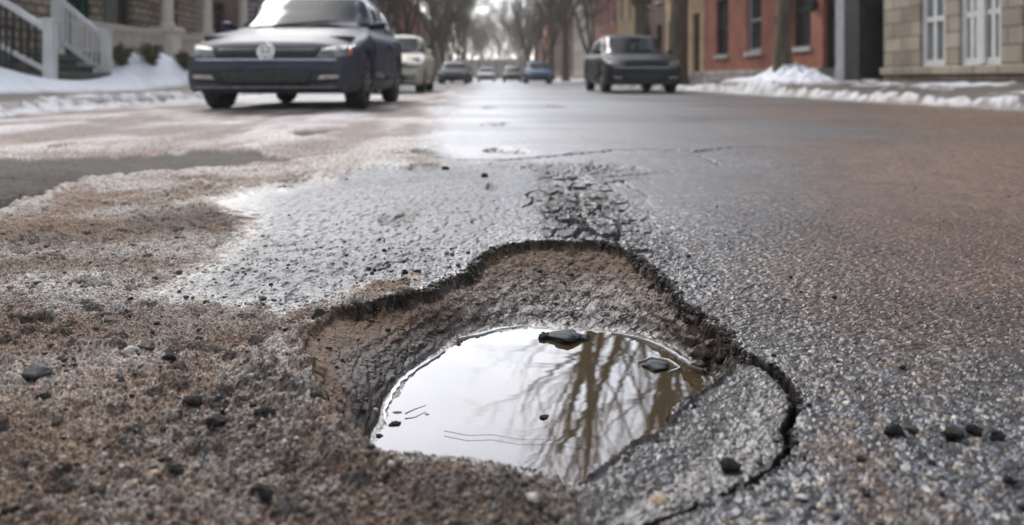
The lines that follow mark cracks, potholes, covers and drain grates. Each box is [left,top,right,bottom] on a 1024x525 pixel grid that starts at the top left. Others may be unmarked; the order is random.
pothole [298,238,752,485]
crack [385,146,765,246]
crack [643,352,812,525]
